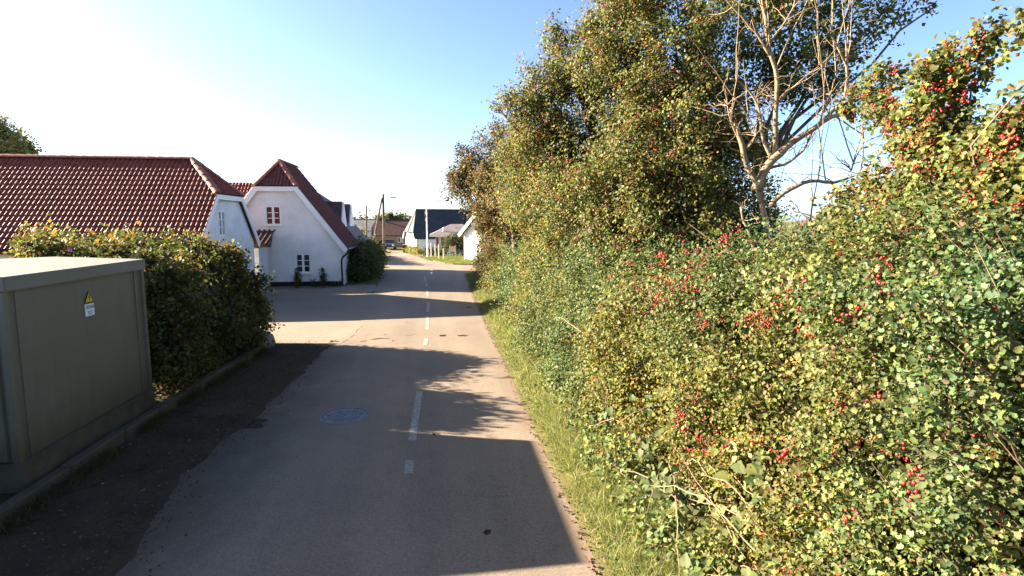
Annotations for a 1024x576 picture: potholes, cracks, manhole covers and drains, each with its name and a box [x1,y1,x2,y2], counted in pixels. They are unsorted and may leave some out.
manhole cover [319,407,370,424]
